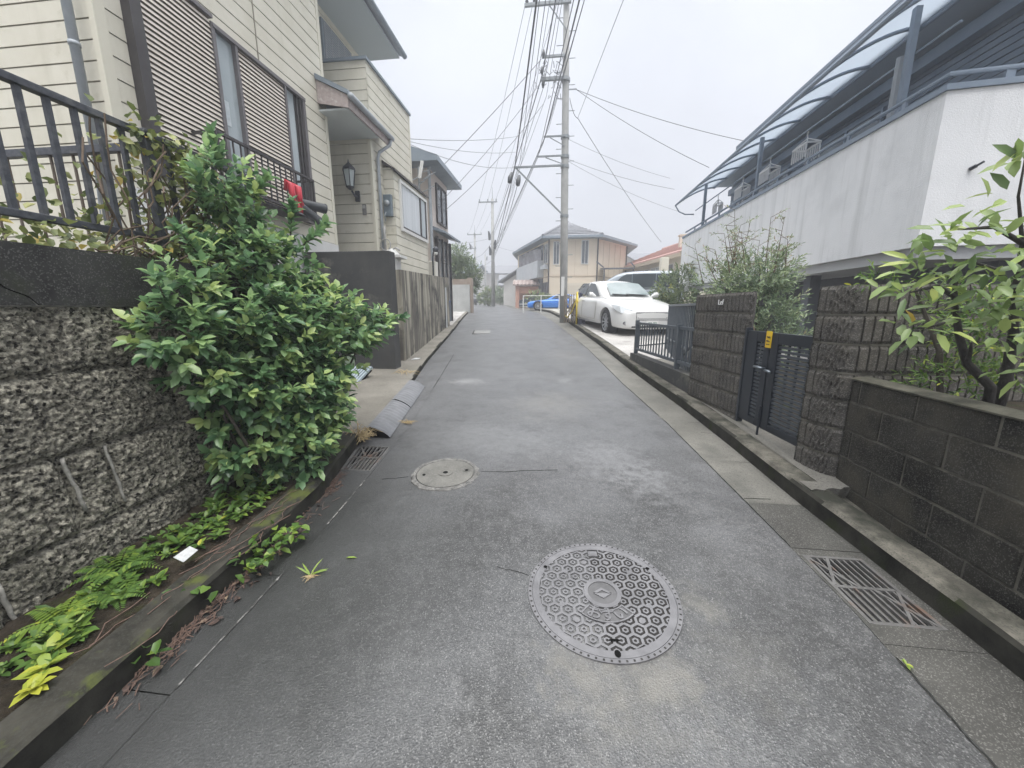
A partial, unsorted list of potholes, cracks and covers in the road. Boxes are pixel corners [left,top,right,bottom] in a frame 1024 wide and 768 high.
drain grate [341,445,390,477]
manhole cover [528,544,683,665]
manhole cover [411,458,480,491]
drain grate [801,555,948,650]
